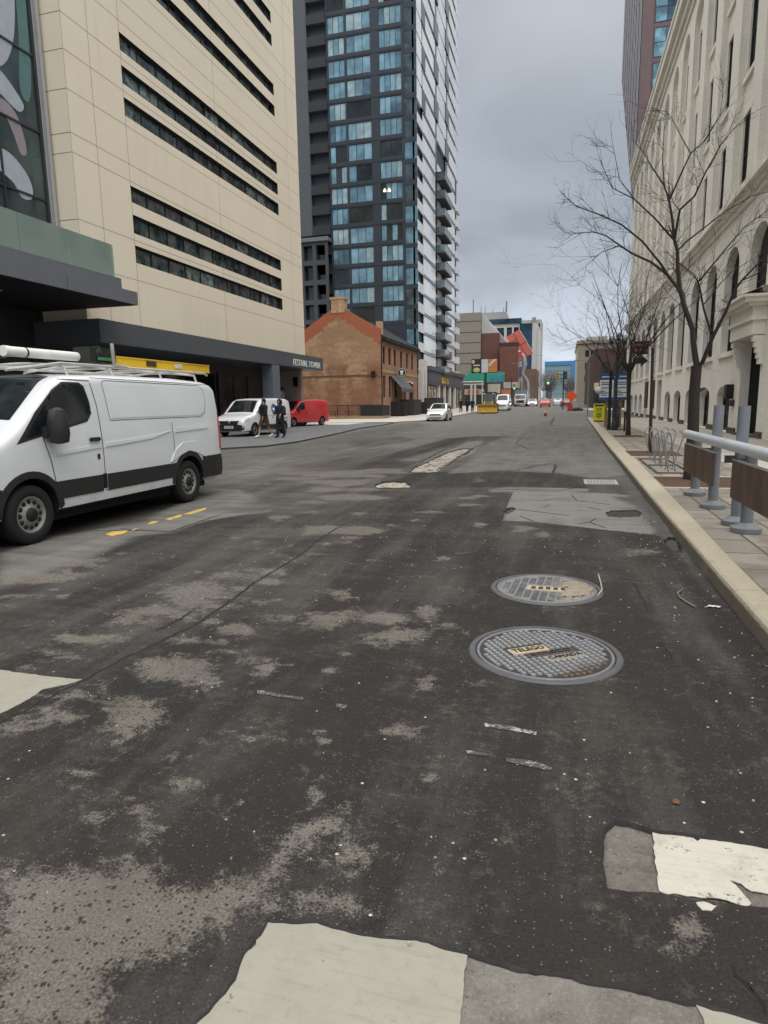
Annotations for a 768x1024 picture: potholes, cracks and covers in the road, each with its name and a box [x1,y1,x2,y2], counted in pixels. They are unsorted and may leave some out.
manhole cover [469,626,624,685]
manhole cover [491,574,604,606]
pothole [605,510,642,518]
